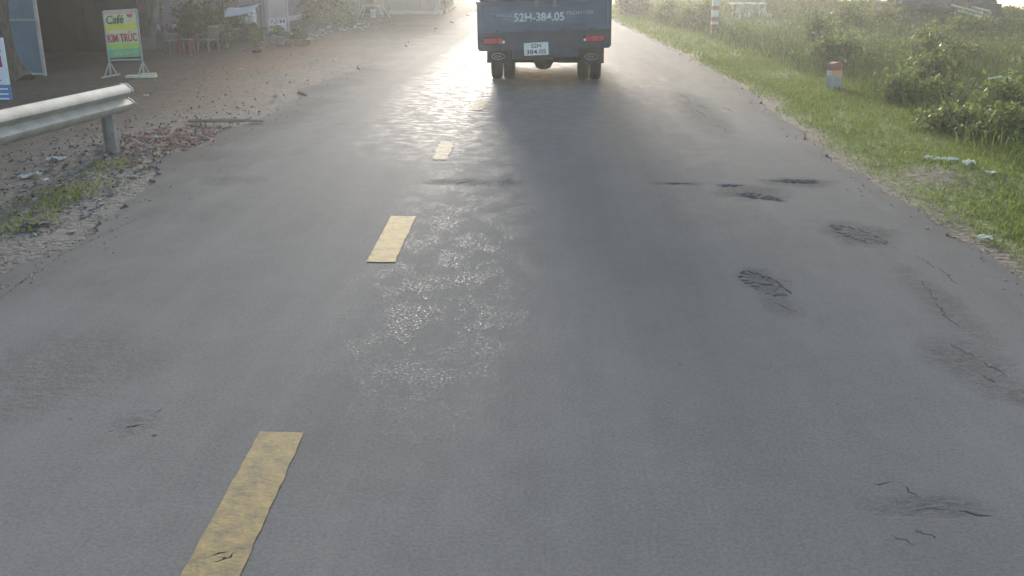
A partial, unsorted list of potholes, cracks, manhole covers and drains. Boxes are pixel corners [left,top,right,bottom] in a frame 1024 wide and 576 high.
crack [917,256,1010,384]
pothole [735,192,785,202]
crack [679,93,731,132]
crack [876,481,992,516]
